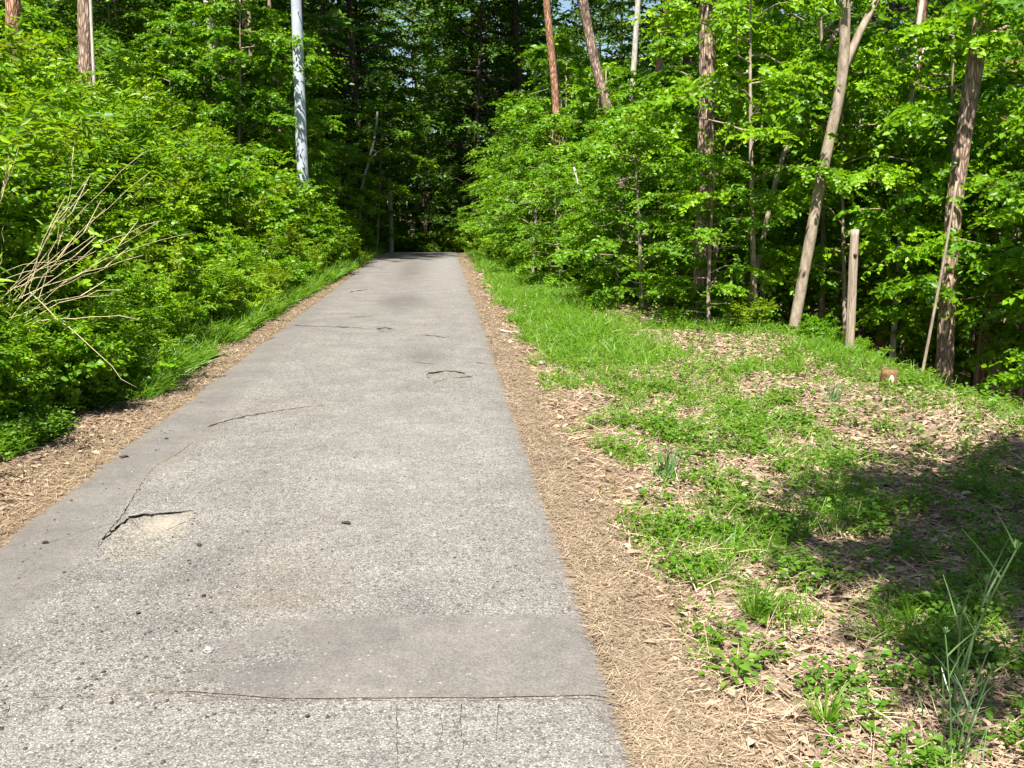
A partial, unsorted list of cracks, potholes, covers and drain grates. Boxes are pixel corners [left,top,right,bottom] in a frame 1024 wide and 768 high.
crack [208,405,328,427]
crack [437,705,464,768]
